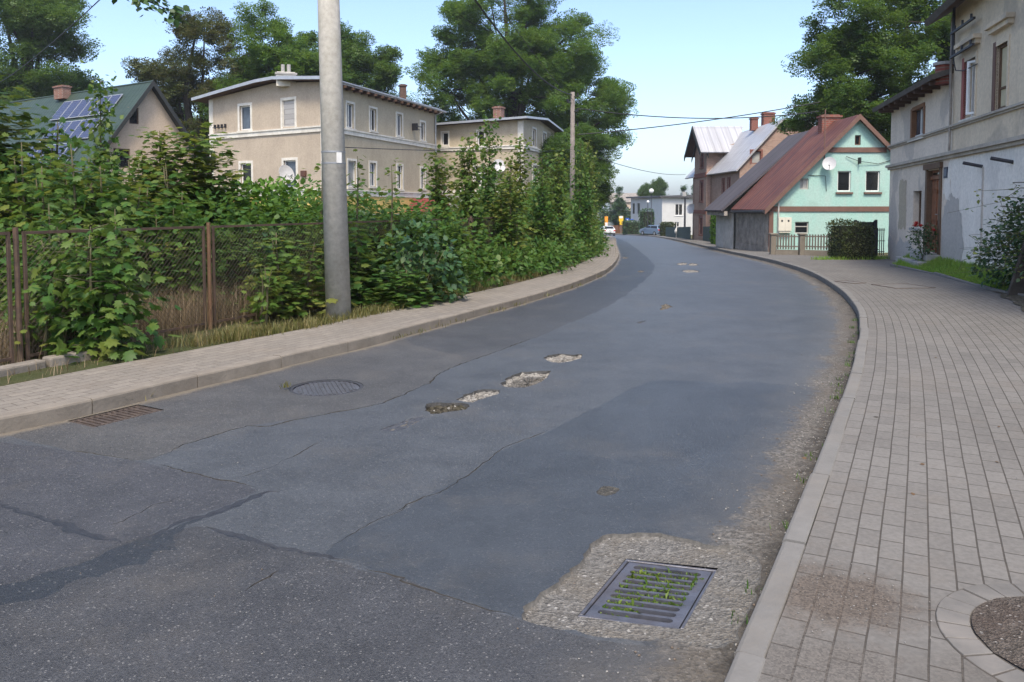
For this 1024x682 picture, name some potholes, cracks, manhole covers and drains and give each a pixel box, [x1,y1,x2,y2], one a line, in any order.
pothole [544,354,582,363]
pothole [500,371,551,388]
drain grate [578,559,717,629]
drain grate [69,405,162,427]
pothole [425,402,470,414]
crack [205,526,350,591]
pothole [596,486,619,496]
pothole [456,389,500,402]
manhole cover [289,380,363,396]
